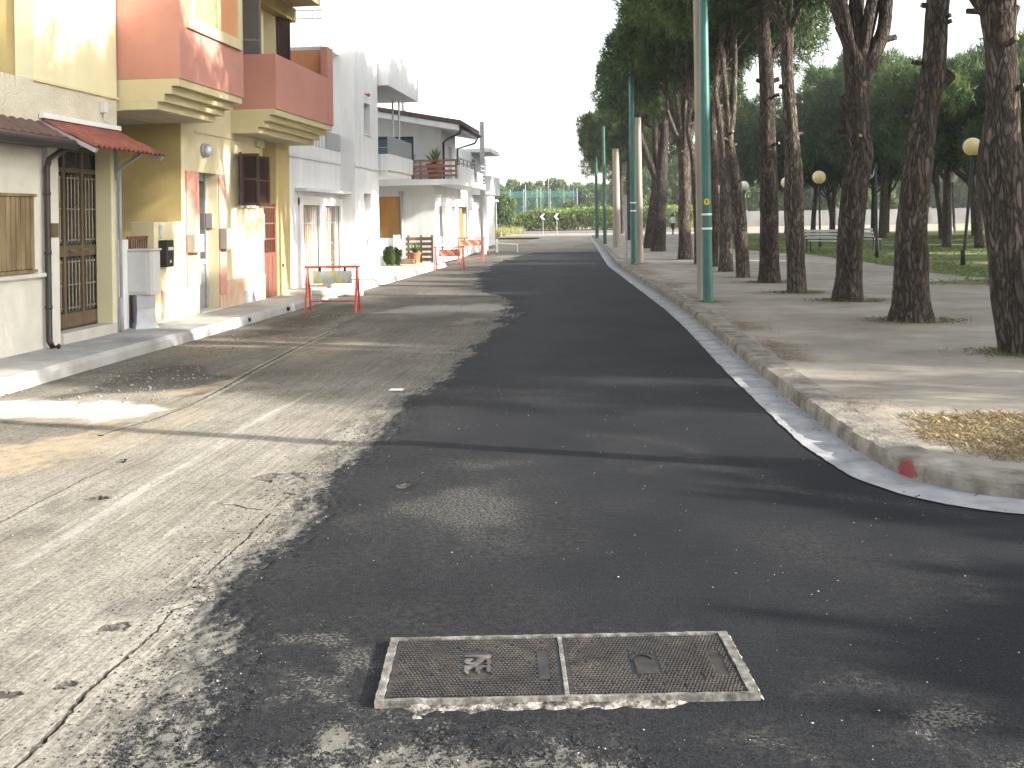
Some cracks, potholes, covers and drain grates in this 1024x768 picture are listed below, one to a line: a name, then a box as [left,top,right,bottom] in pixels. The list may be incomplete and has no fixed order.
pothole [71,494,120,503]
pothole [0,688,37,702]
pothole [39,677,85,694]
manhole cover [374,631,764,719]
crack [0,501,295,768]
pothole [82,617,143,636]
